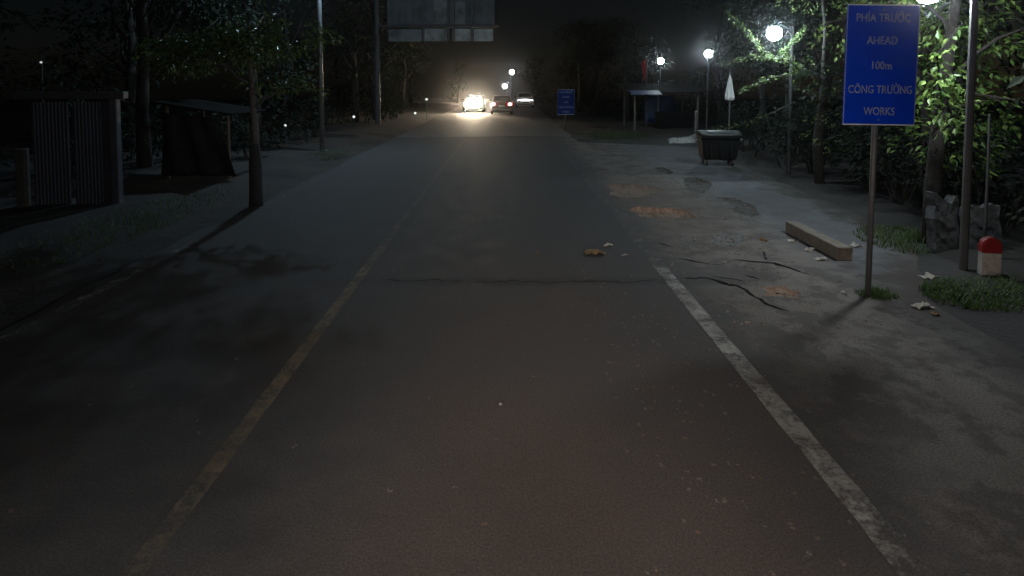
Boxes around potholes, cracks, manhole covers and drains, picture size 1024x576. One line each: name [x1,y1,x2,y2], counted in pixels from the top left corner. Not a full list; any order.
crack [657,242,810,311]
pothole [664,177,717,193]
pothole [715,197,779,217]
